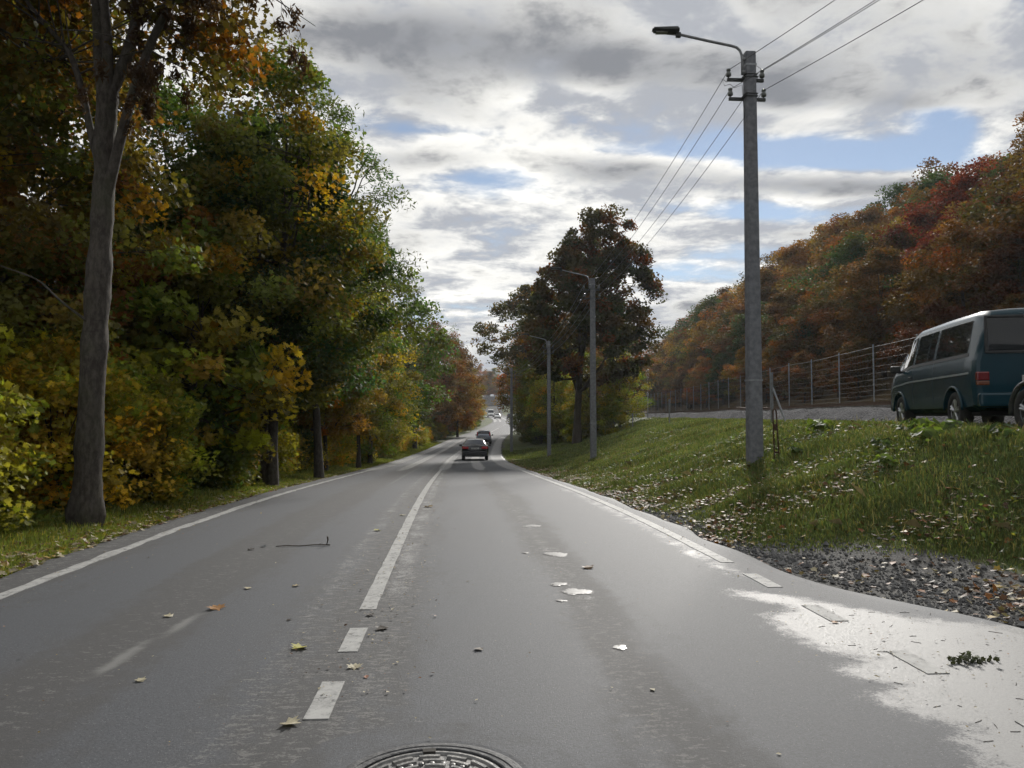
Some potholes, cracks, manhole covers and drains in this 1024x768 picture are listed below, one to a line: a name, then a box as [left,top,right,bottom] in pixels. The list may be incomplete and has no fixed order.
manhole cover [287,723,587,768]
